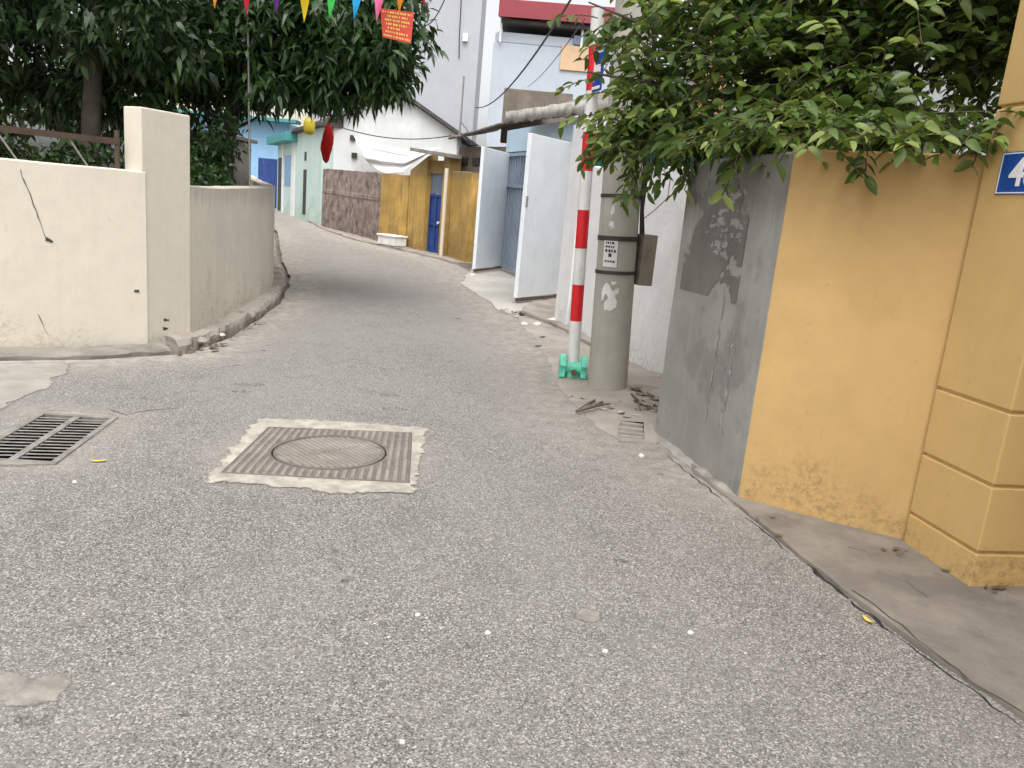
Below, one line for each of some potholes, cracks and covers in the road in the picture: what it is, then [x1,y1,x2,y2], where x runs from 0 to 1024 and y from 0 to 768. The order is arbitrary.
crack [665,453,727,505]
crack [807,547,1022,727]
crack [746,518,788,552]
manhole cover [222,427,412,483]
drain grate [0,412,118,465]
drain grate [617,421,645,439]
